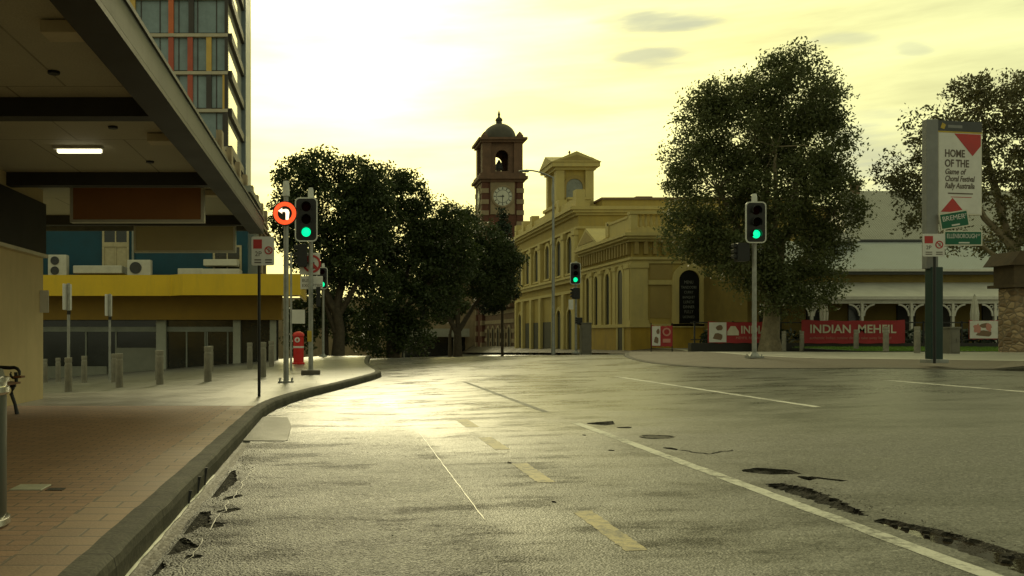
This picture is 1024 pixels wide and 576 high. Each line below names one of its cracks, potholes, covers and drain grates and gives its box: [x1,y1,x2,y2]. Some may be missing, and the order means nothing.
pothole [183,511,212,535]
pothole [211,470,237,498]
pothole [874,518,1024,574]
pothole [766,483,868,516]
pothole [168,537,199,555]
